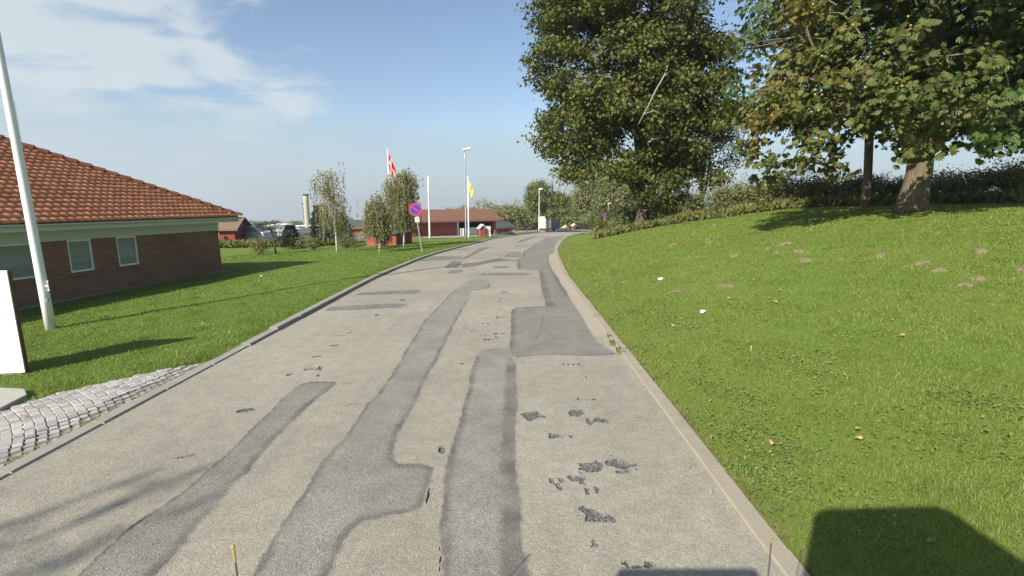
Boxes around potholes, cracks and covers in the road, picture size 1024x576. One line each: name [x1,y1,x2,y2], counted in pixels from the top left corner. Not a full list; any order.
pothole [586,417,610,425]
pothole [549,478,565,491]
pothole [567,475,587,486]
pothole [604,455,639,474]
pothole [579,506,616,523]
pothole [577,461,603,474]
pothole [520,411,547,422]
